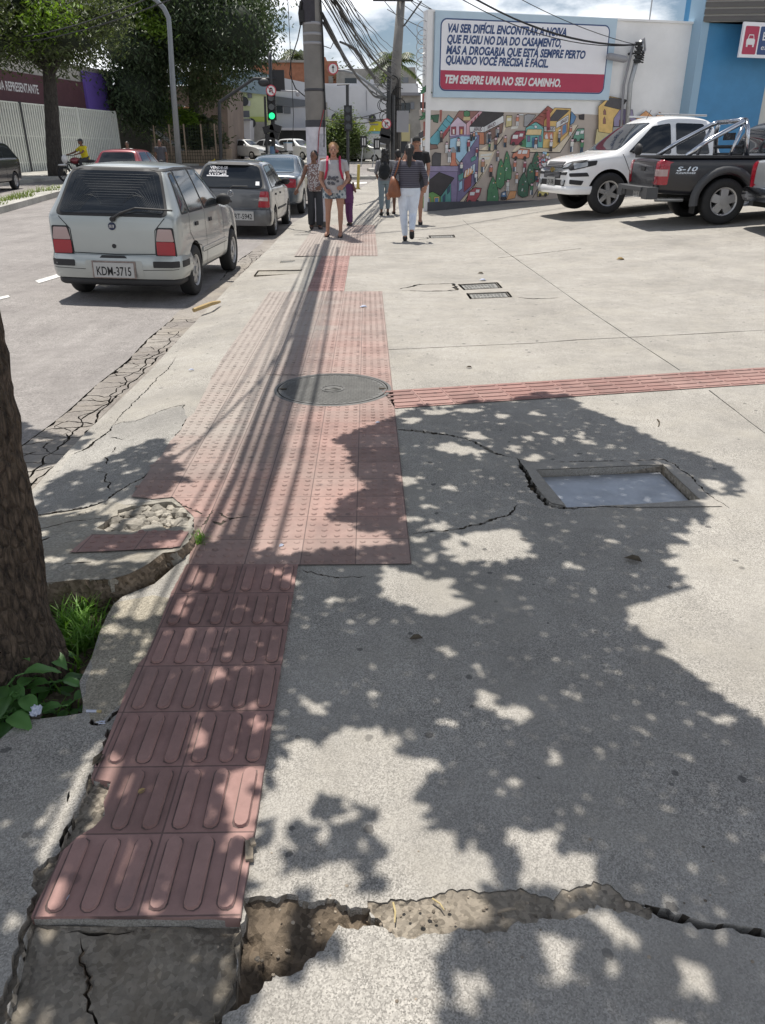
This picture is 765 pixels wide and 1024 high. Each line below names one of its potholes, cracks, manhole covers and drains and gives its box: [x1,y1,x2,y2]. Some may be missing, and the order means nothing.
crack [398,429,726,534]
crack [89,710,119,726]
pothole [97,502,191,532]
pothole [367,881,652,939]
pothole [206,894,383,1024]
manhole cover [274,373,391,406]
crack [78,933,125,1024]
crack [22,318,192,499]
